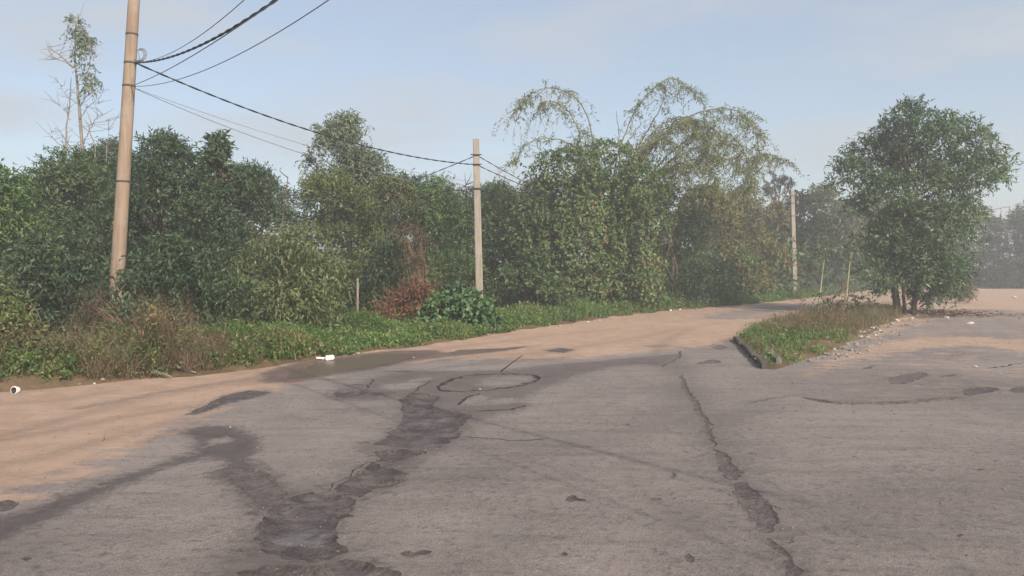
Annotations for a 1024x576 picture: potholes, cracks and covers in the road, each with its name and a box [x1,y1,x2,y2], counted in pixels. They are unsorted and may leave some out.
crack [662,350,718,447]
crack [353,371,541,411]
pothole [400,549,433,557]
crack [747,396,959,405]
